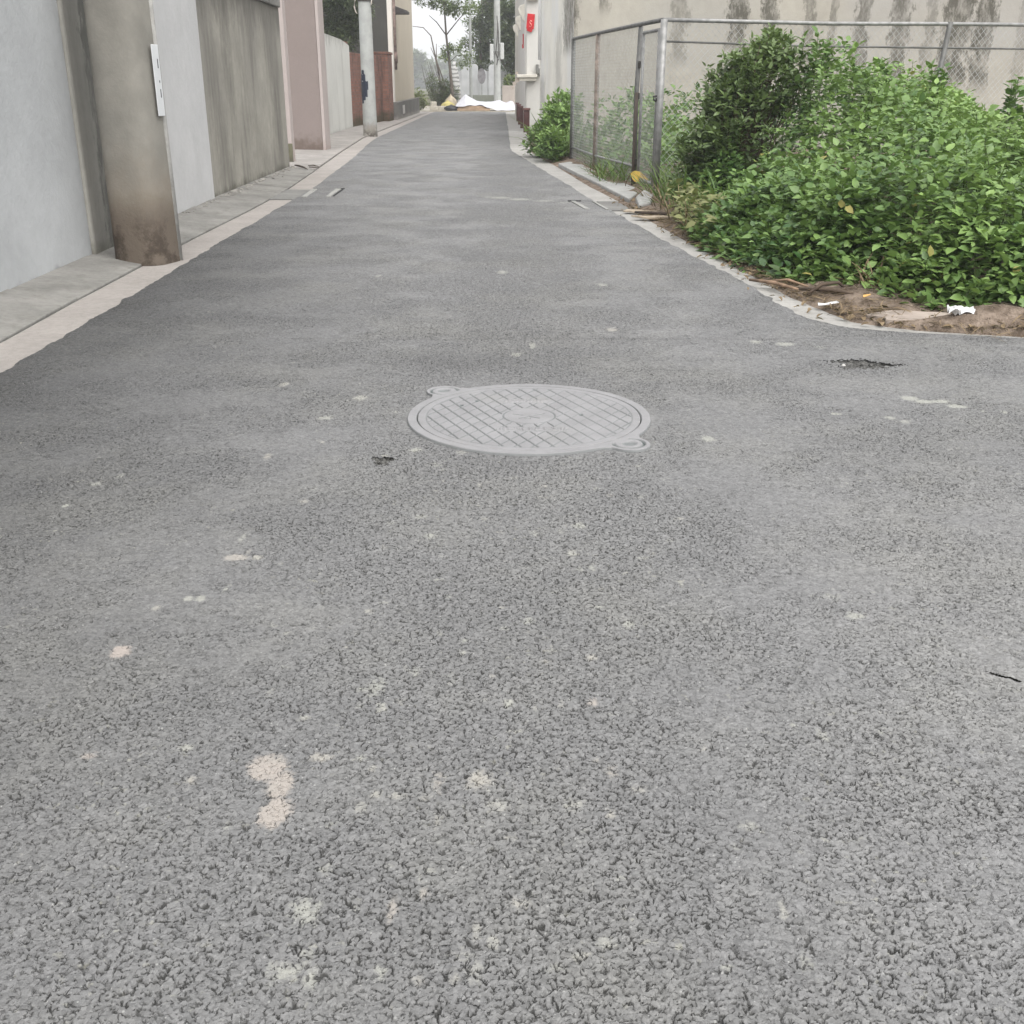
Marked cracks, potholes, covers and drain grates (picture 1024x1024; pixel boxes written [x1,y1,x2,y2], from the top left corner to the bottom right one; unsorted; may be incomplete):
manhole cover [407,384,651,456]
pothole [371,457,399,466]
pothole [823,359,908,370]
